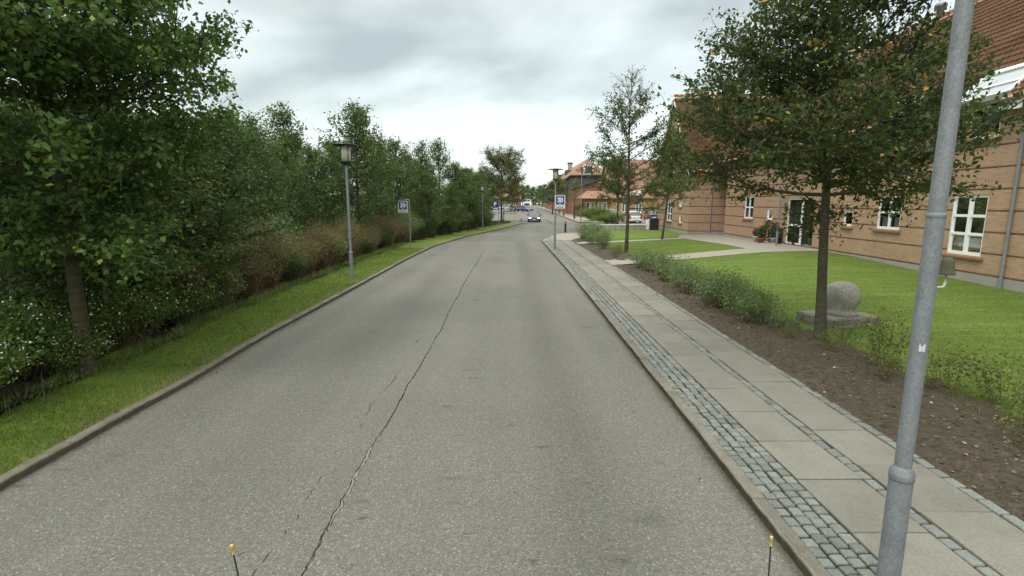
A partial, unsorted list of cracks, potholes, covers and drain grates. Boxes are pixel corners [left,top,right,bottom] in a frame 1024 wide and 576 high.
crack [238,251,484,576]
